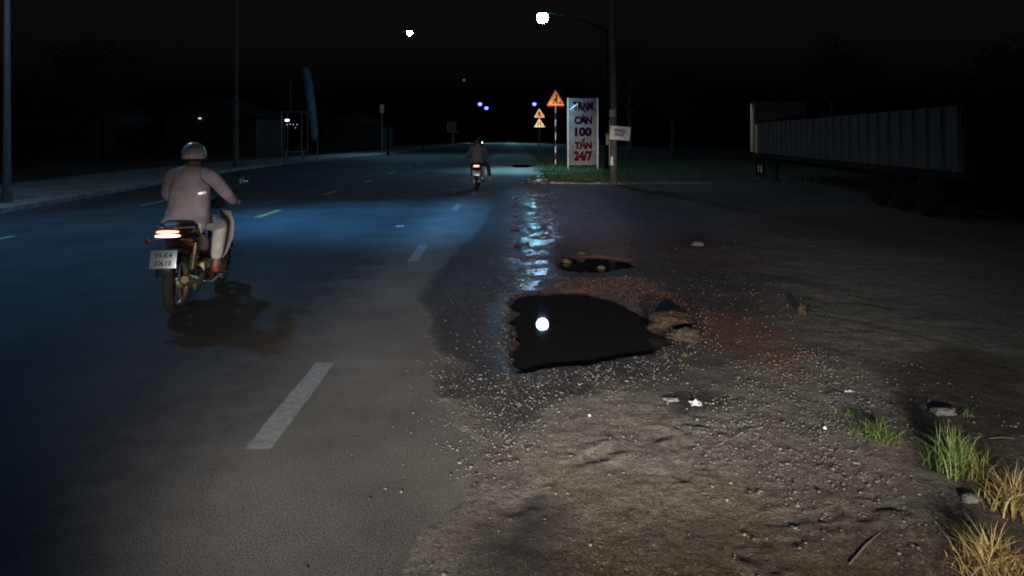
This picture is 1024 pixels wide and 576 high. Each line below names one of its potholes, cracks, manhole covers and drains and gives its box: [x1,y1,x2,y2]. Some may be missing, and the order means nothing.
pothole [550,253,643,274]
pothole [501,162,542,171]
pothole [494,287,686,375]
